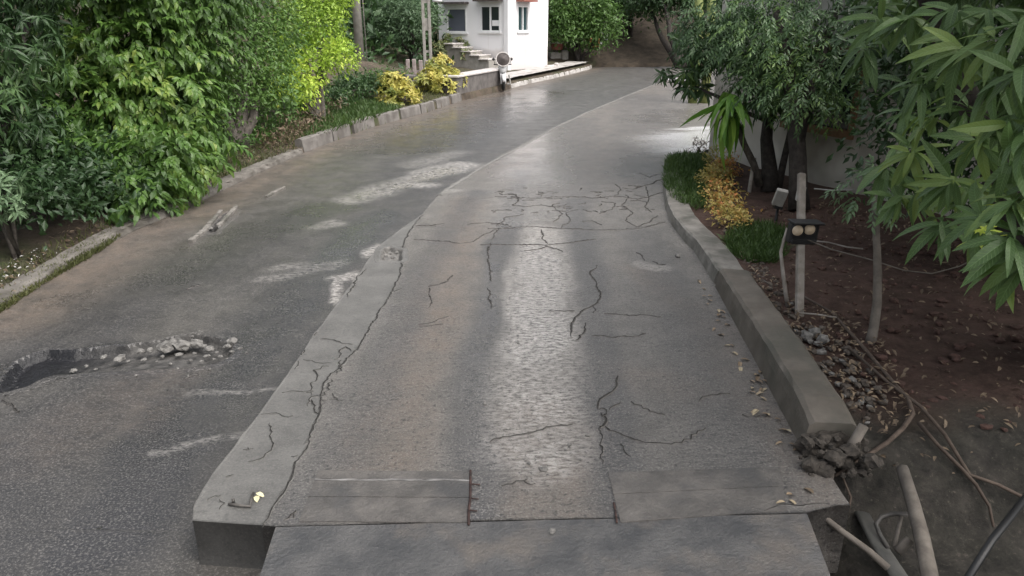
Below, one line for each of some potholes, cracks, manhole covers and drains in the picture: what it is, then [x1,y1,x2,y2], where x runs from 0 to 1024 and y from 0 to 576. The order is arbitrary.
pothole [0,330,248,397]
crack [549,264,646,340]
crack [490,424,573,442]
crack [467,173,664,309]
crack [596,376,769,462]
crack [207,215,453,527]
